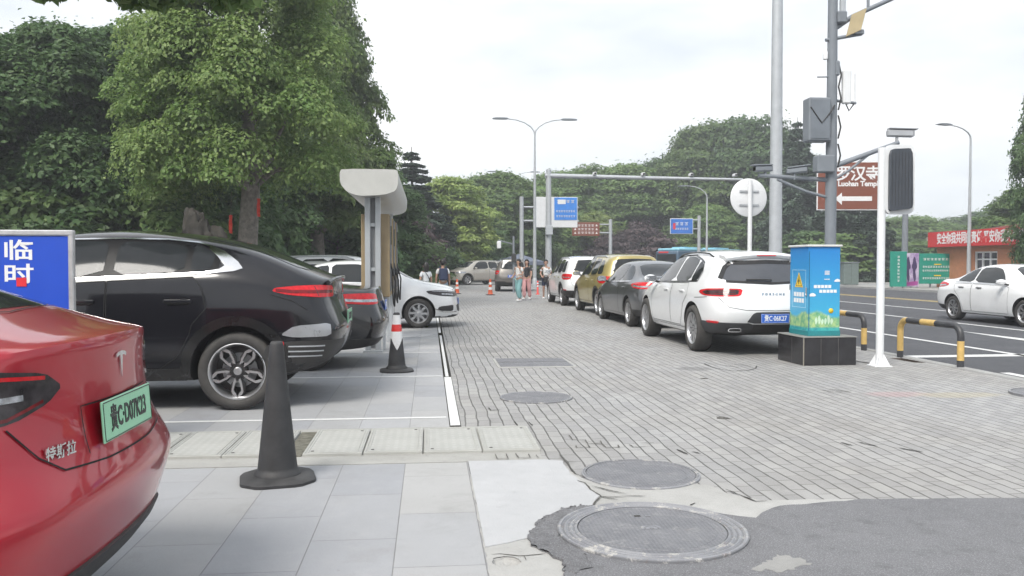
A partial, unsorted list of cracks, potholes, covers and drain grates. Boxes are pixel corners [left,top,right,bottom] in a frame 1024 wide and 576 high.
manhole cover [581,459,701,490]
manhole cover [1008,387,1024,397]
manhole cover [492,358,577,368]
manhole cover [500,391,572,404]
manhole cover [557,502,750,564]
